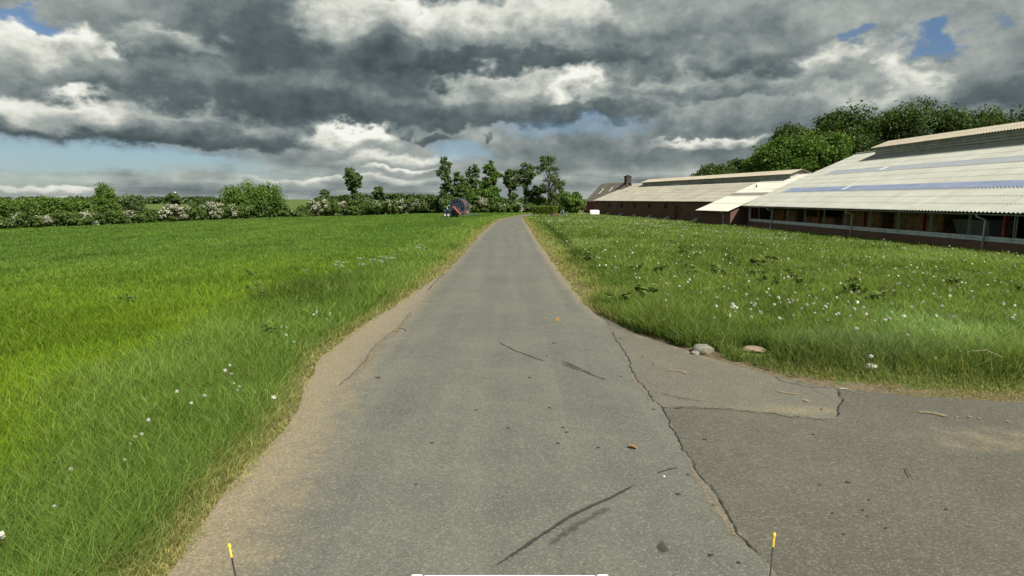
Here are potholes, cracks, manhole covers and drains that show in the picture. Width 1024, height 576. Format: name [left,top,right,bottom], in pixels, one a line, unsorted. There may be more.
crack [613,332,844,562]
